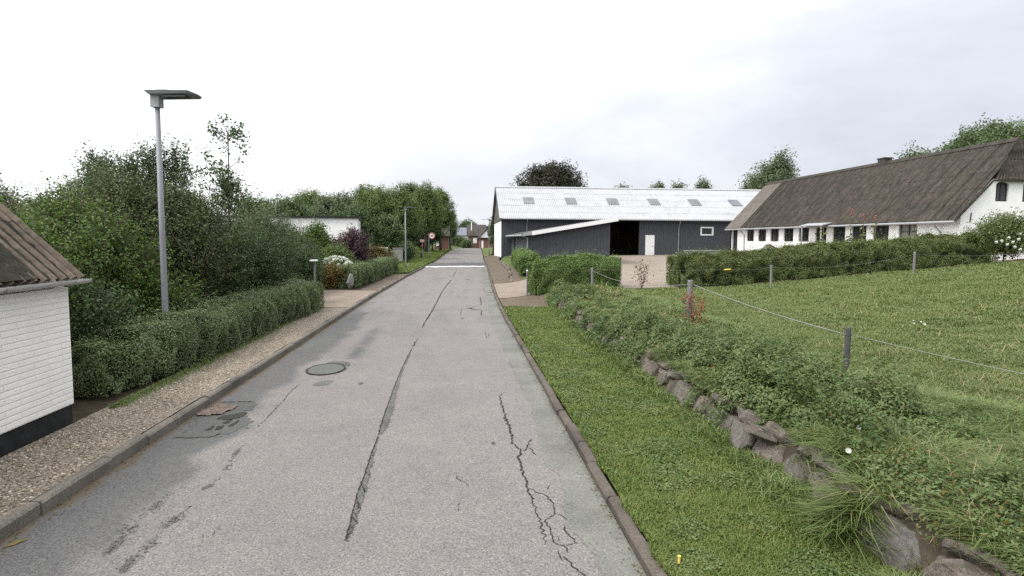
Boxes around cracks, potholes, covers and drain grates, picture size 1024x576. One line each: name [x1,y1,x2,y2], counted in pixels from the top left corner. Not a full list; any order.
crack [413,270,457,346]
crack [231,384,299,427]
crack [101,433,244,576]
manhole cover [305,363,346,375]
crack [499,394,586,576]
